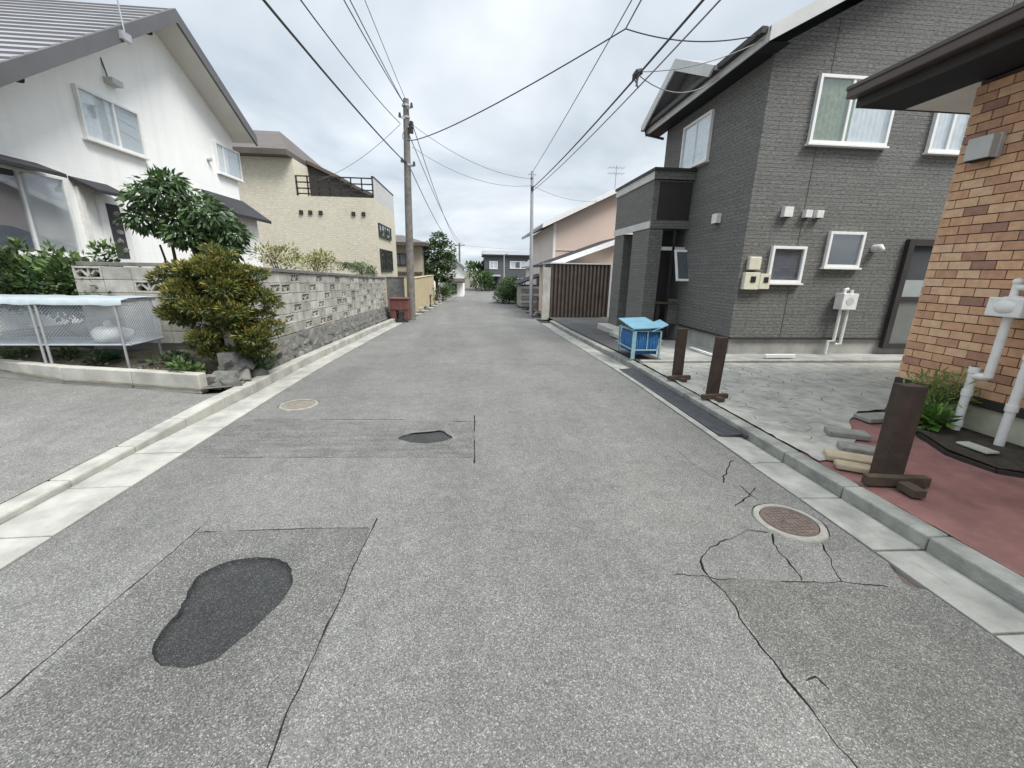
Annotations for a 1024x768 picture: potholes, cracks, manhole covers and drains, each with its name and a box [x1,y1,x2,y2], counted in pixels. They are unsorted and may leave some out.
crack [674,530,888,768]
manhole cover [751,504,829,542]
crack [674,448,758,506]
manhole cover [278,399,319,411]
drain grate [619,367,748,438]
pothole [398,430,452,443]
